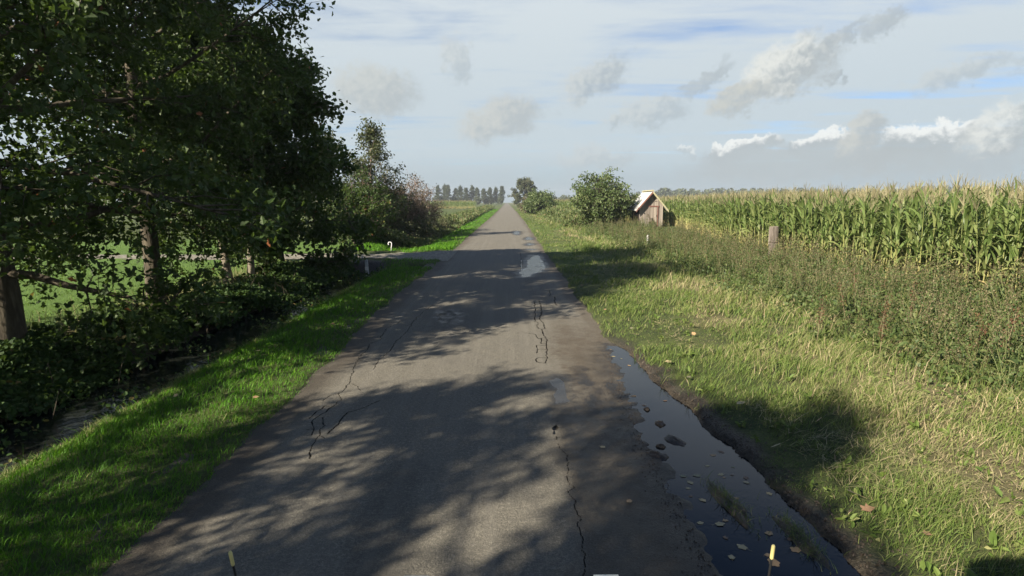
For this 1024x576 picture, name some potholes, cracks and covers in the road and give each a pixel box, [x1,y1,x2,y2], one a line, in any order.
crack [556,420,586,576]
crack [308,308,429,459]
crack [529,291,558,363]
